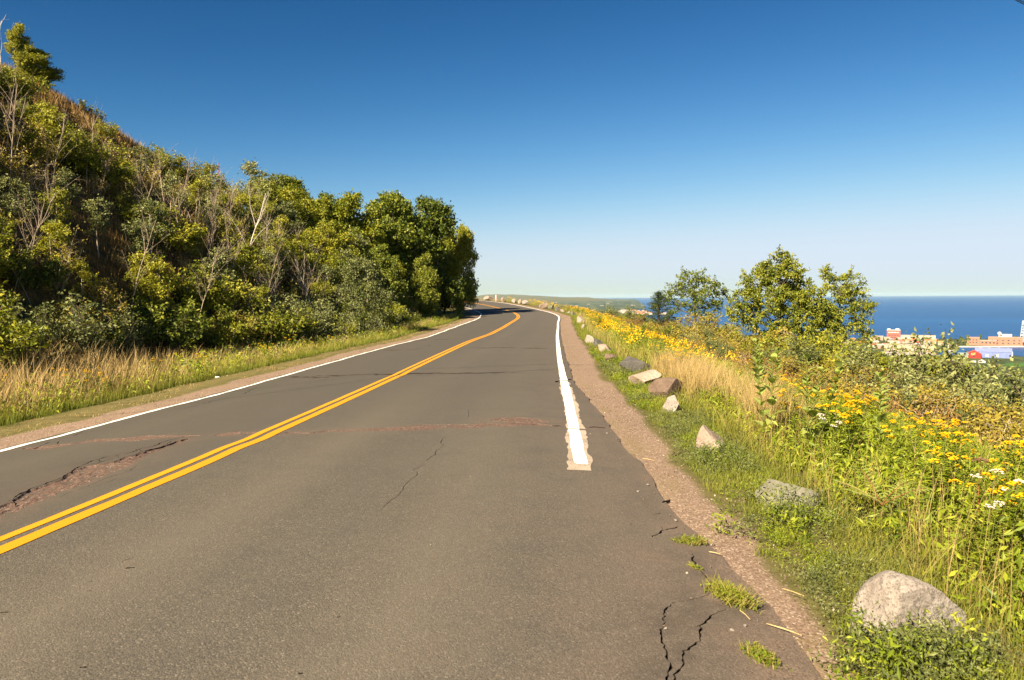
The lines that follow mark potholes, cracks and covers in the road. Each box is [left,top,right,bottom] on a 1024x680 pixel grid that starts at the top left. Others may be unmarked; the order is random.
crack [659,554,726,680]
pothole [0,438,188,518]
